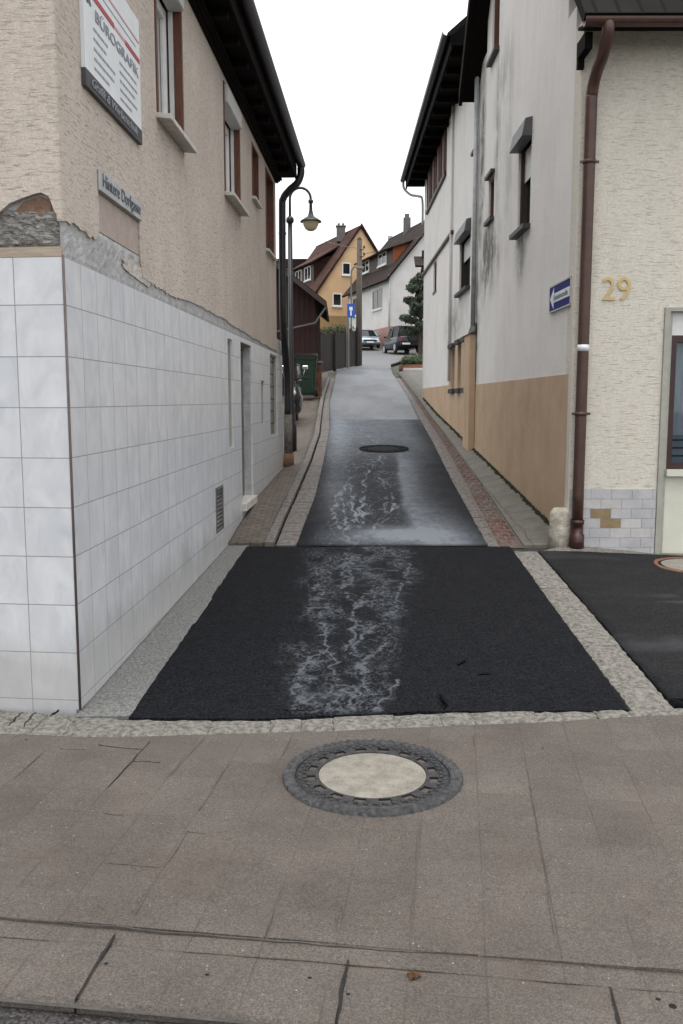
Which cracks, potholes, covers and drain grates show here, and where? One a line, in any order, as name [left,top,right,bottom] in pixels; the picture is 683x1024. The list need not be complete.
crack [16,738,205,788]
manhole cover [282,739,463,817]
manhole cover [359,444,409,453]
manhole cover [654,557,683,572]
